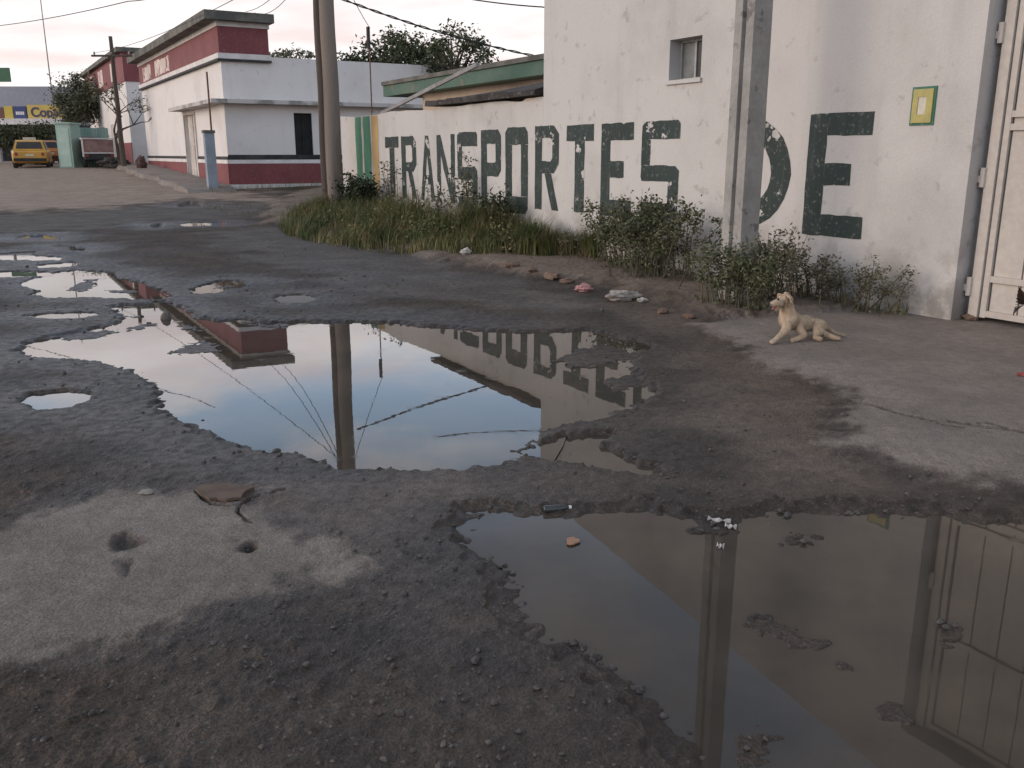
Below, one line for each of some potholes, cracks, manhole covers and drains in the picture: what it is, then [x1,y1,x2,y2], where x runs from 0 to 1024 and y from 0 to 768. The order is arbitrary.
pothole [0,270,55,278]
pothole [187,279,251,294]
pothole [109,554,141,579]
pothole [232,538,265,553]
pothole [103,527,157,554]
crack [850,399,1024,433]
pothole [270,293,321,303]
pothole [19,268,176,301]
pothole [432,492,1024,768]
pothole [7,299,663,474]
